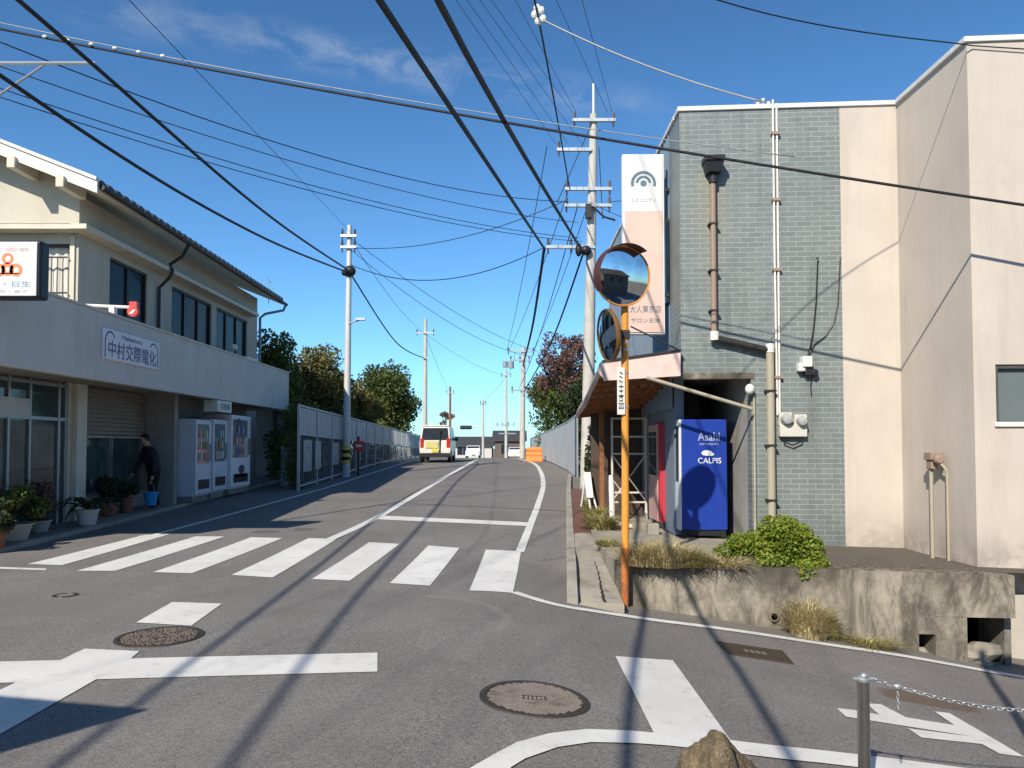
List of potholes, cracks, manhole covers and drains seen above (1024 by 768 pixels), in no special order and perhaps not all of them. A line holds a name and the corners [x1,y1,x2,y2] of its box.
drain grate [716,641,794,665]
manhole cover [113,626,205,648]
manhole cover [479,680,591,719]
crack [594,561,607,602]
